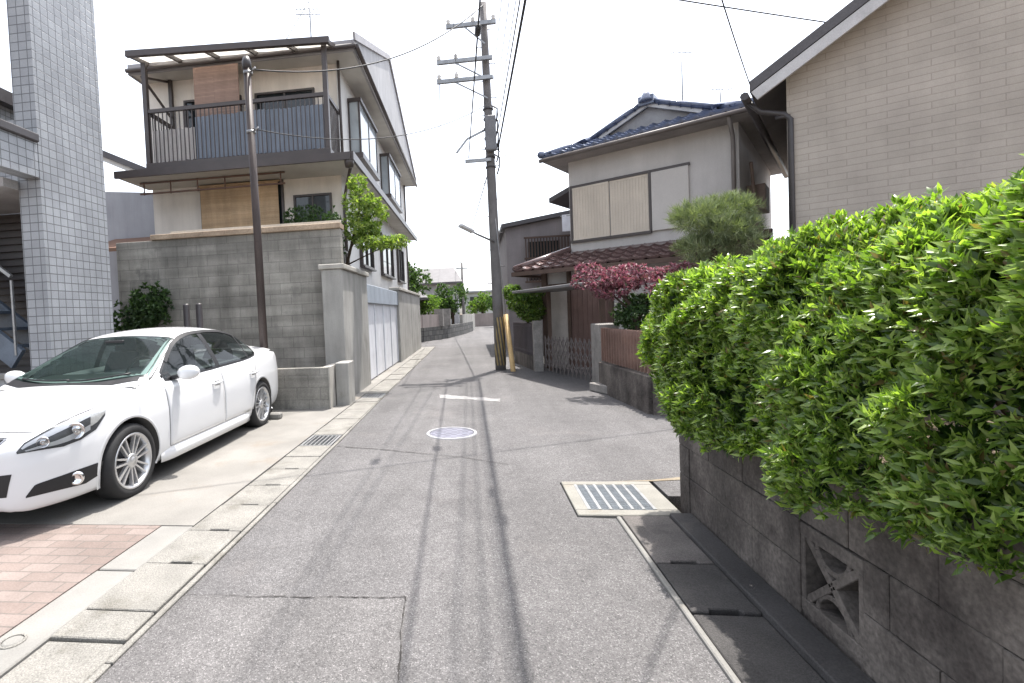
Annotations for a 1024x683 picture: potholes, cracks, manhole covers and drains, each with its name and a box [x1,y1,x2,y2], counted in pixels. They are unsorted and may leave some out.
drain grate [300,435,342,446]
manhole cover [426,427,477,440]
utility cover [0,633,28,650]
drain grate [561,481,681,519]
